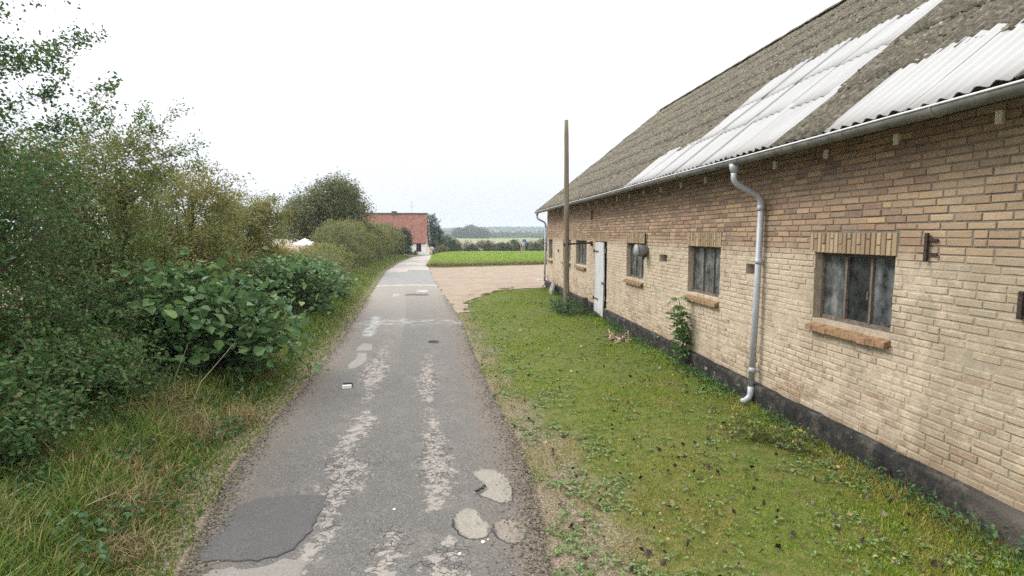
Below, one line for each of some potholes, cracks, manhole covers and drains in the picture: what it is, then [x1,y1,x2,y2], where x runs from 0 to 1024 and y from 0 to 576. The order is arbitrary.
crack [316,447,380,533]
crack [369,526,413,572]
crack [411,539,472,576]
crack [414,433,453,485]
